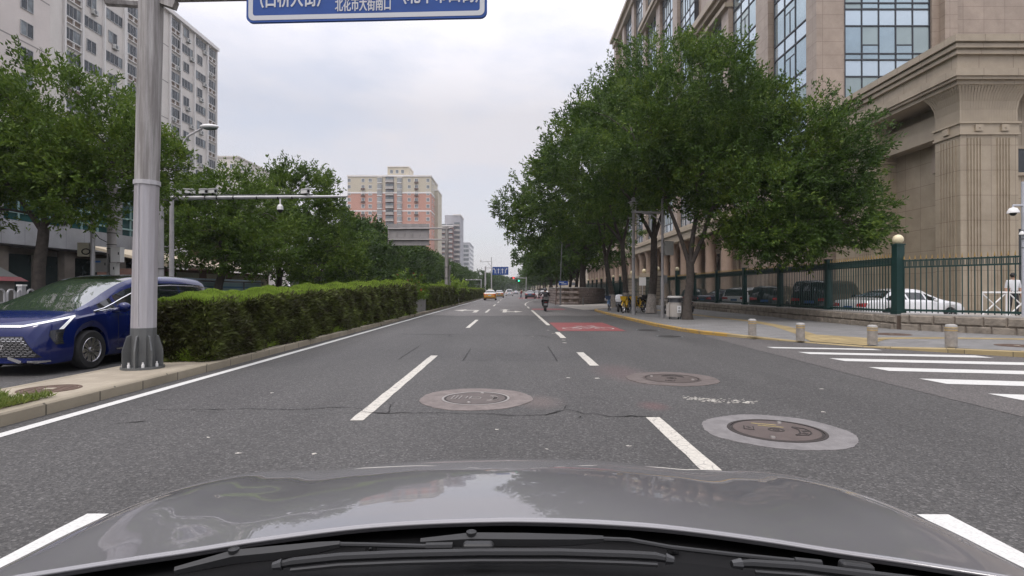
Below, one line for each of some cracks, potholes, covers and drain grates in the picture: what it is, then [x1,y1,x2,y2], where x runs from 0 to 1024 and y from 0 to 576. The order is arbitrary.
manhole cover [701,414,859,451]
manhole cover [15,384,83,394]
manhole cover [419,388,533,411]
crack [113,404,645,424]
manhole cover [625,372,720,386]
